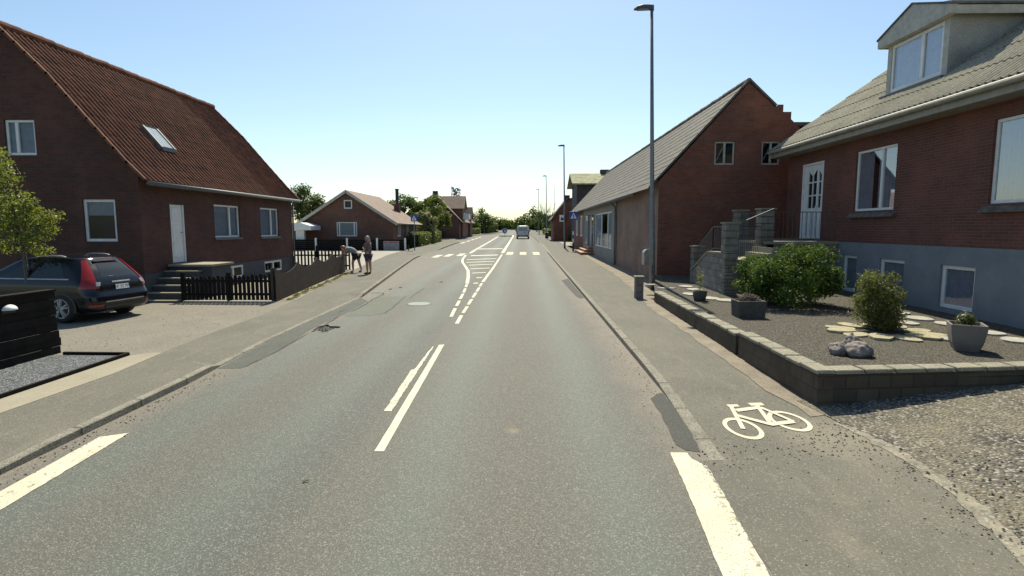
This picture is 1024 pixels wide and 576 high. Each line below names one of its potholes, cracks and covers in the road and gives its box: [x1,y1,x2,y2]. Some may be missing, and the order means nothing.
pothole [312,325,340,333]
